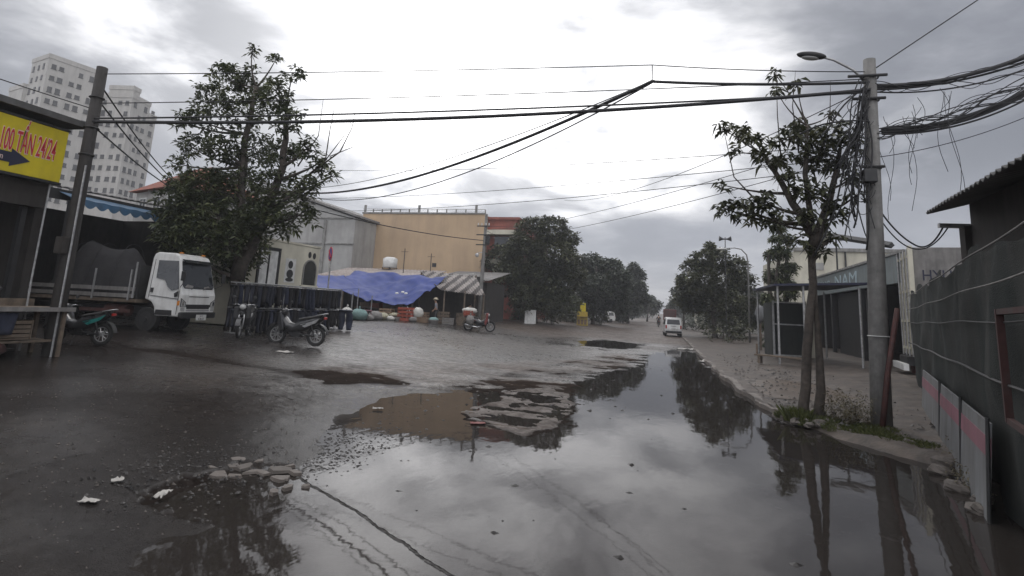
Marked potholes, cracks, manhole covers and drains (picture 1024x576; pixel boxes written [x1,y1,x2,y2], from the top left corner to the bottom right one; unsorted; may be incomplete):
crack [298,476,455,576]
pothole [141,465,267,506]
pothole [463,388,573,435]
